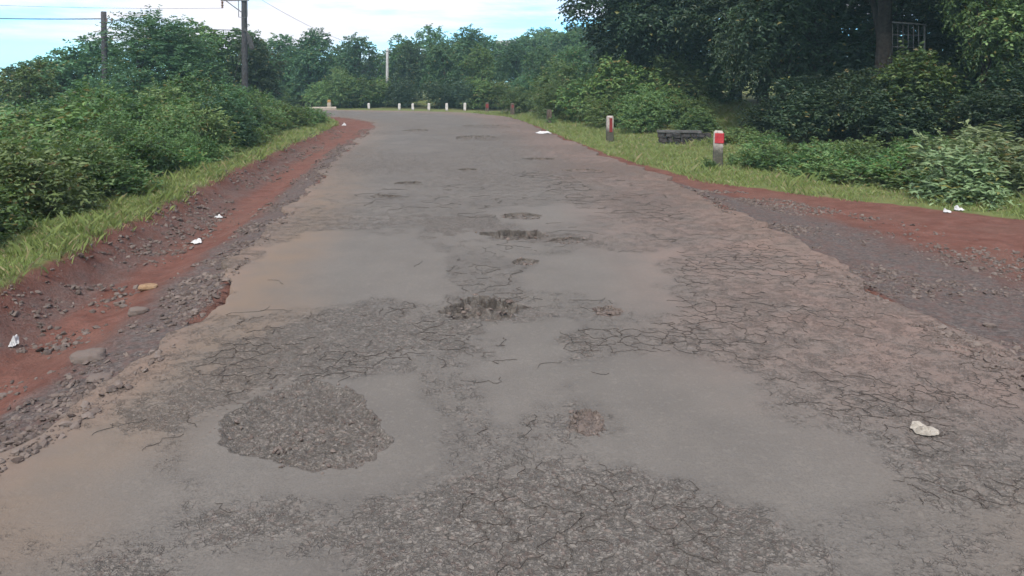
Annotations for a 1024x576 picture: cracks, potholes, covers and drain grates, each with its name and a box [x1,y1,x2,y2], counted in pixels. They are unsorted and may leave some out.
pothole [504,256,548,267]
pothole [560,405,614,441]
crack [449,462,777,576]
pothole [429,293,539,323]
pothole [472,228,555,242]
crack [92,237,1024,513]
pothole [494,211,550,221]
